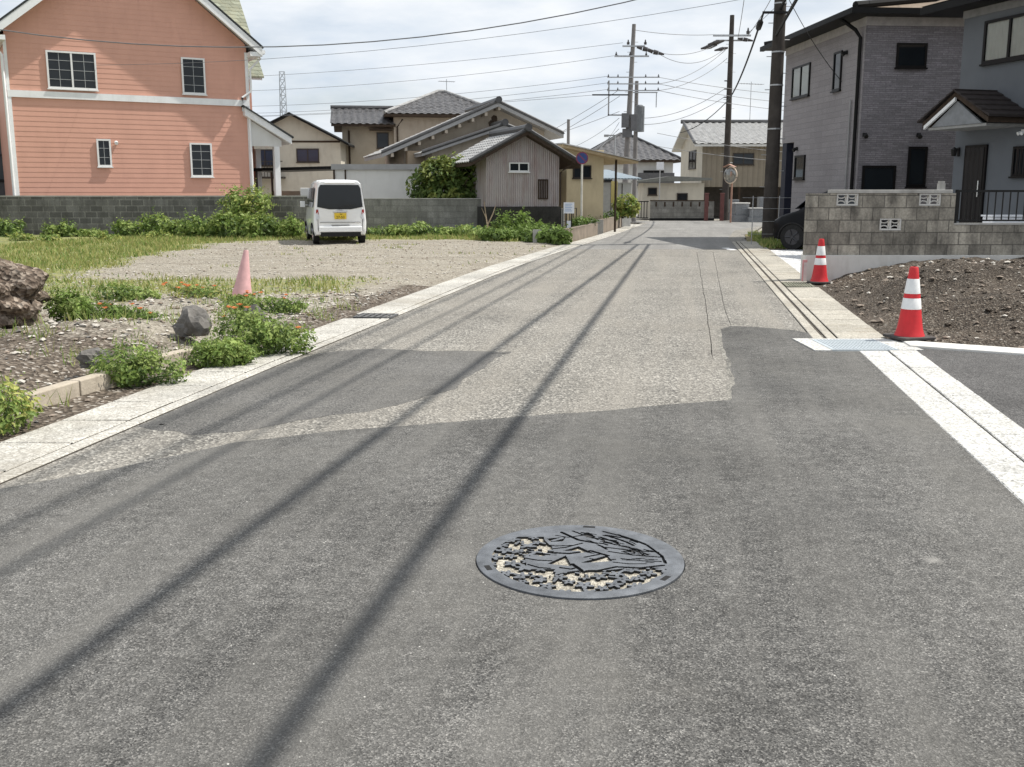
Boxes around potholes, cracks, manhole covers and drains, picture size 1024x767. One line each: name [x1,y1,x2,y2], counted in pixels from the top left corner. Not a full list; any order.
crack [697,251,731,357]
manhole cover [475,525,685,600]
drain grate [811,339,899,352]
